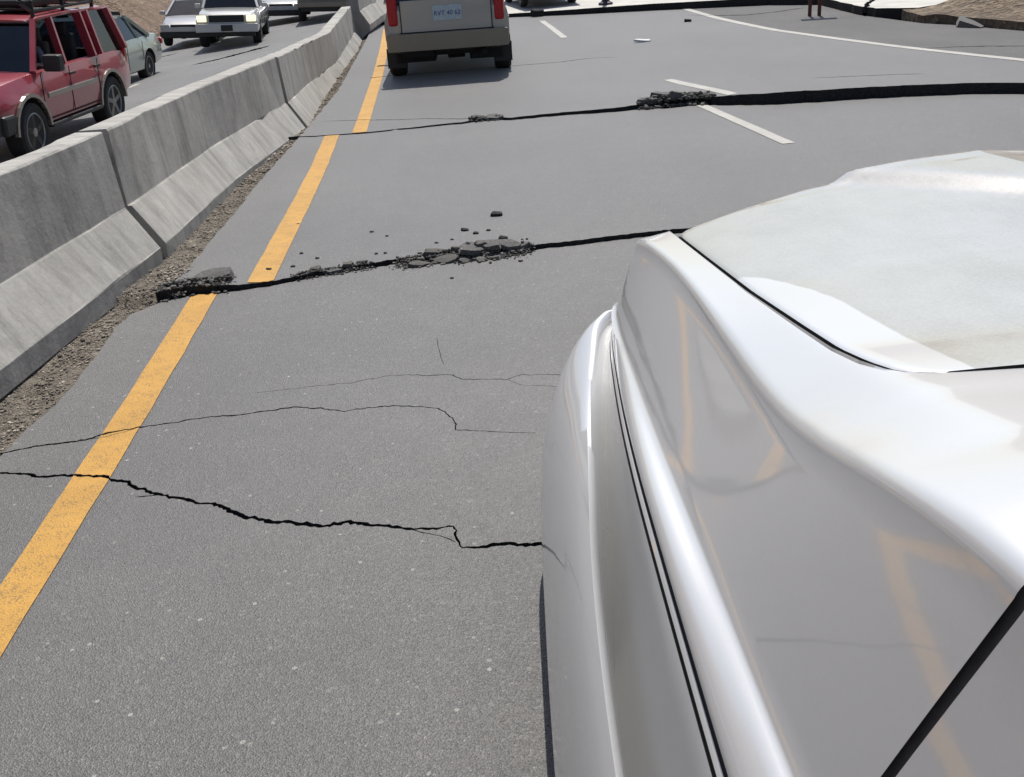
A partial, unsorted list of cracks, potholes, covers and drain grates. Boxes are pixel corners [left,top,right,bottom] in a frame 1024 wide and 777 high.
crack [288,74,1024,140]
crack [155,227,692,303]
crack [0,340,558,549]
